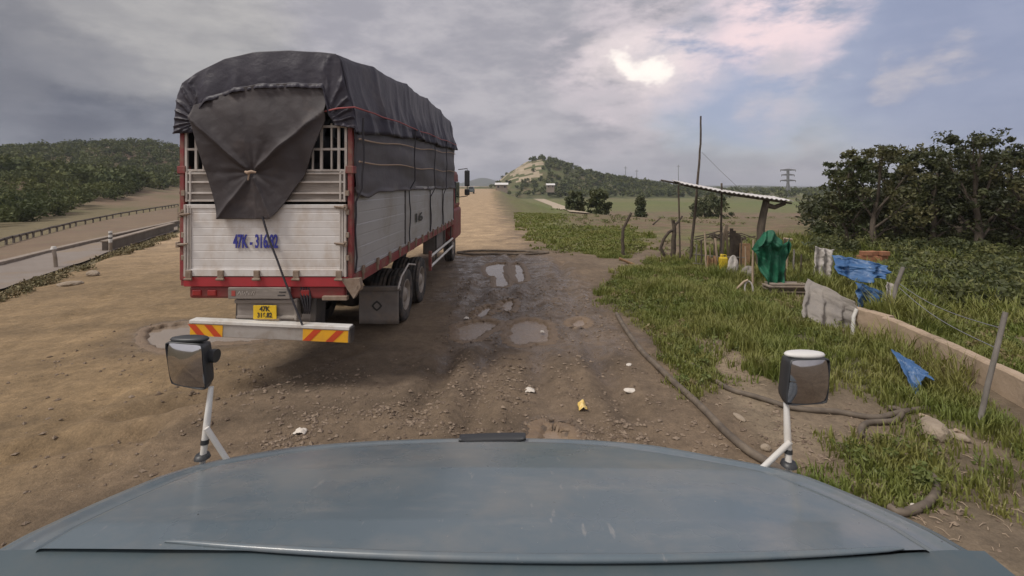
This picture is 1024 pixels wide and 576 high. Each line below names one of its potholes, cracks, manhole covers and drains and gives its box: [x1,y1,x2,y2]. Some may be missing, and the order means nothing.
pothole [480,261,518,288]
pothole [134,321,269,354]
pothole [563,316,594,329]
pothole [526,418,588,440]
pothole [489,297,522,314]
pothole [498,316,559,348]
pothole [503,262,530,284]
pothole [448,317,505,344]
pothole [467,304,505,323]
